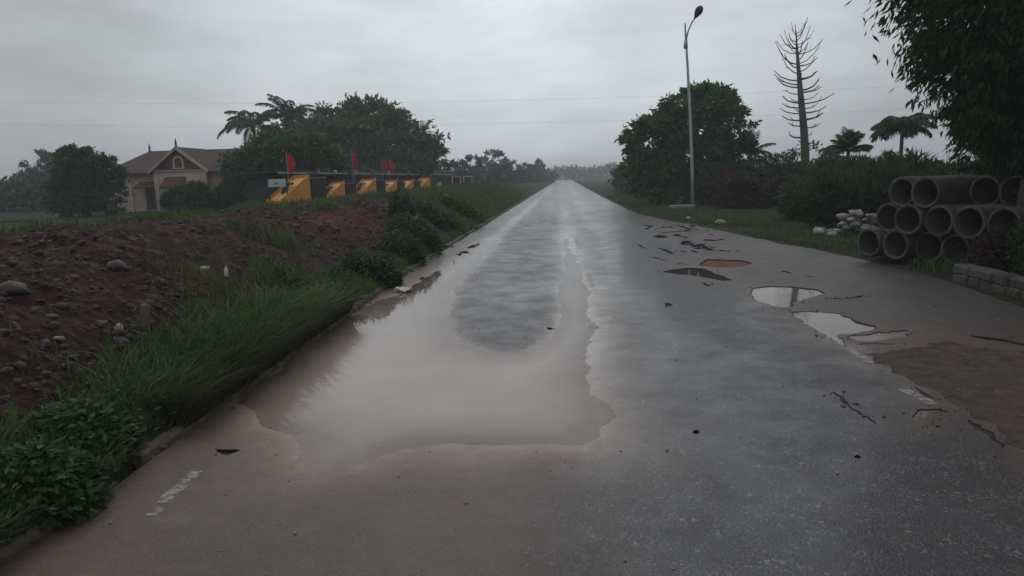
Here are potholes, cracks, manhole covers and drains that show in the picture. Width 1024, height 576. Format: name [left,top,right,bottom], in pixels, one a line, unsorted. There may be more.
crack [832,391,877,424]
pothole [664,268,732,281]
pothole [790,311,876,346]
pothole [848,330,909,341]
crack [638,224,738,264]
pothole [866,341,1024,450]
pothole [750,286,825,307]
crack [967,420,1006,448]
